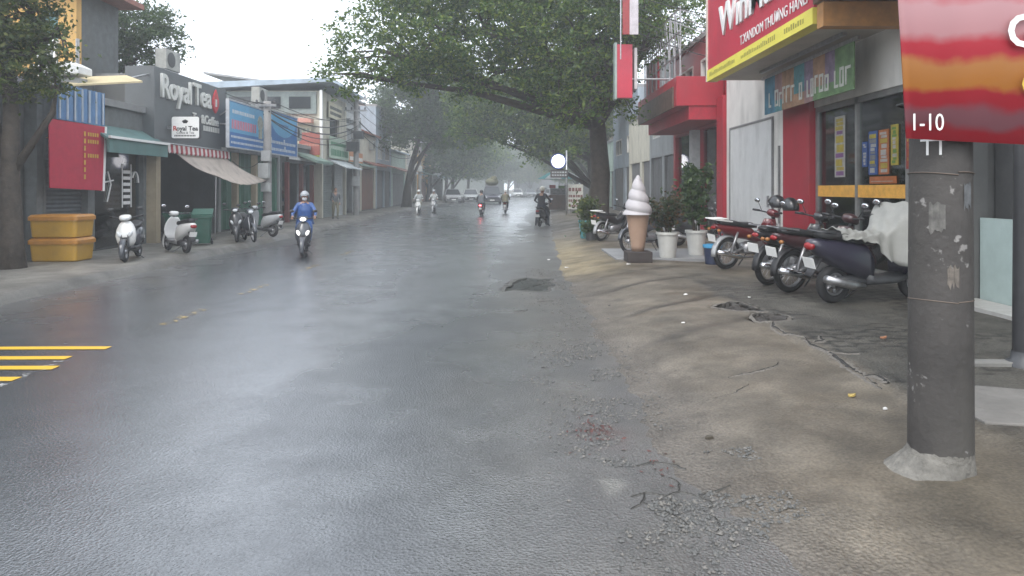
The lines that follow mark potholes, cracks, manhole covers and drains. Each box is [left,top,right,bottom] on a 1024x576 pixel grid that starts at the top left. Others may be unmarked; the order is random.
crack [713,321,890,398]
pothole [501,277,560,292]
crack [631,460,766,532]
pothole [749,312,792,323]
pothole [710,301,770,313]
